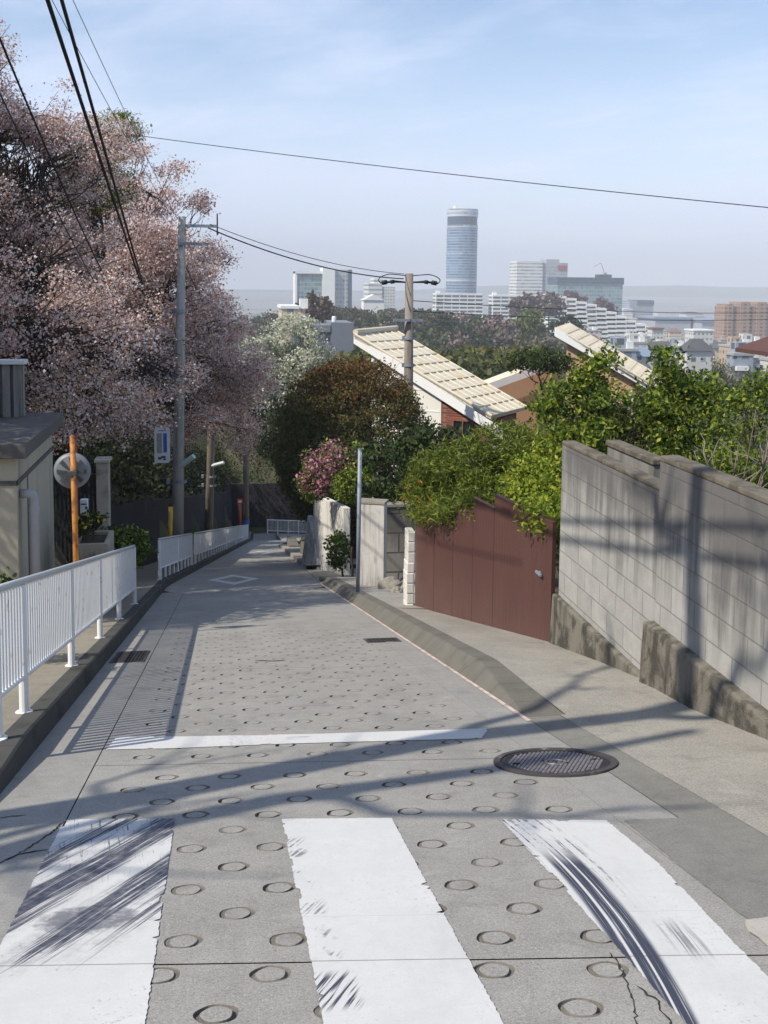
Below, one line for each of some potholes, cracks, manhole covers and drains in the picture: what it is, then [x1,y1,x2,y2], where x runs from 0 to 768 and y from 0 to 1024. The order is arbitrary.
crack [609,952,672,1024]
drain grate [109,650,150,663]
manhole cover [493,747,618,778]
